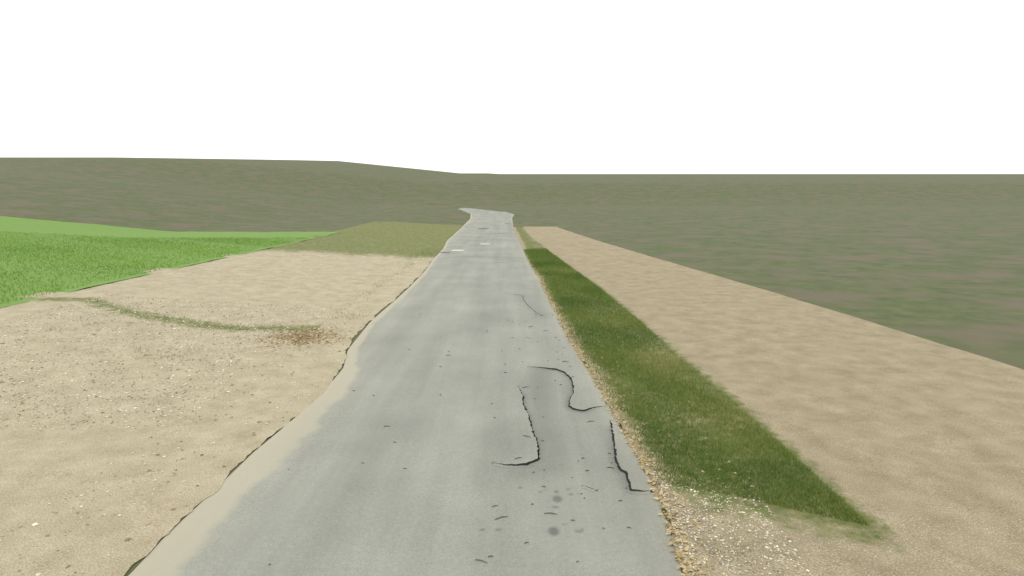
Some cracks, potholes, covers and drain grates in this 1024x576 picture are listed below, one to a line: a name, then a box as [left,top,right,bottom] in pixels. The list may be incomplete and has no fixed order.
crack [492,366,651,494]
